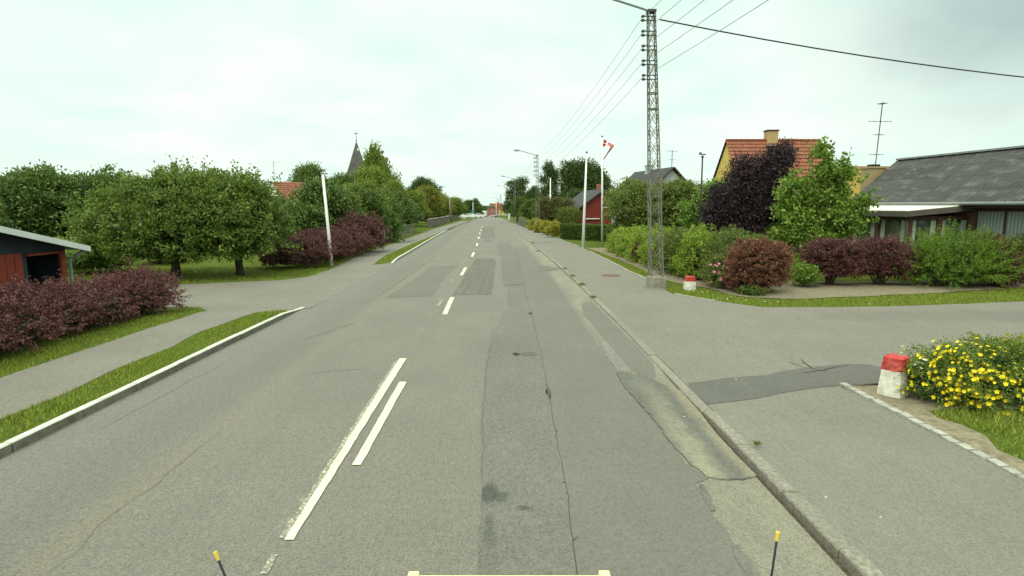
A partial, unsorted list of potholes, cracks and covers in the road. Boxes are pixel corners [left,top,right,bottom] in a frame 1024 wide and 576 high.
crack [51,437,213,571]
